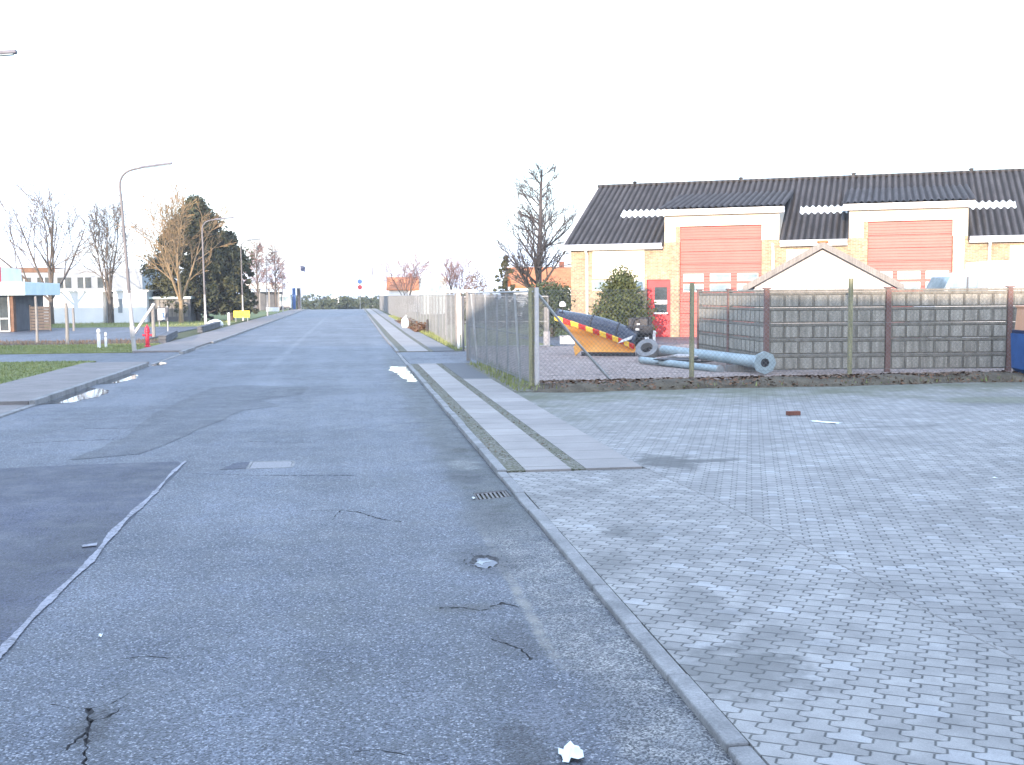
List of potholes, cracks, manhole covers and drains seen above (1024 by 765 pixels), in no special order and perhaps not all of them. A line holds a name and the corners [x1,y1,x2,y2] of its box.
pothole [464,553,508,570]
crack [355,749,430,760]
crack [492,639,533,660]
crack [440,602,521,611]
manhole cover [246,460,296,469]
crack [51,694,128,765]
drain grate [473,490,511,500]
